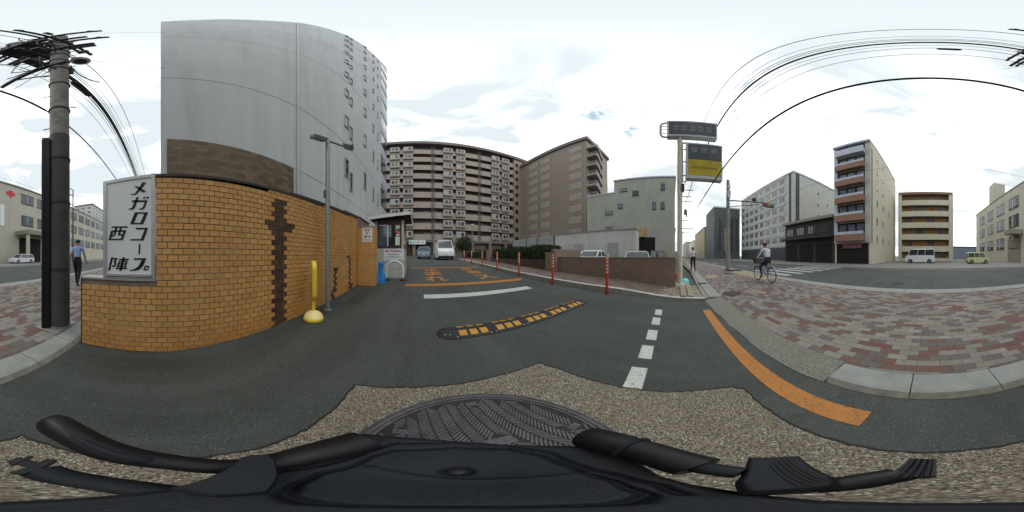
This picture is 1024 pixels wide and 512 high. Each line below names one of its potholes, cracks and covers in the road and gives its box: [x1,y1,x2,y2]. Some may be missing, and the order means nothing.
drain grate [342,294,370,304]
manhole cover [359,393,650,469]
